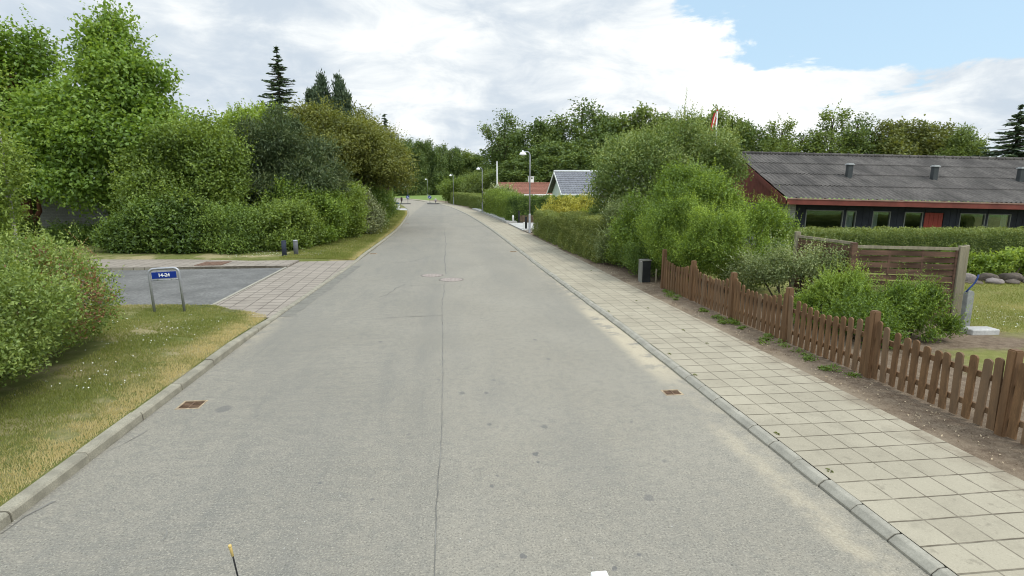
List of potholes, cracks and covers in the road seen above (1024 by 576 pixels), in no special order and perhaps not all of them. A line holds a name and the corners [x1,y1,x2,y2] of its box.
drain grate [174,400,208,410]
crack [390,233,447,576]
